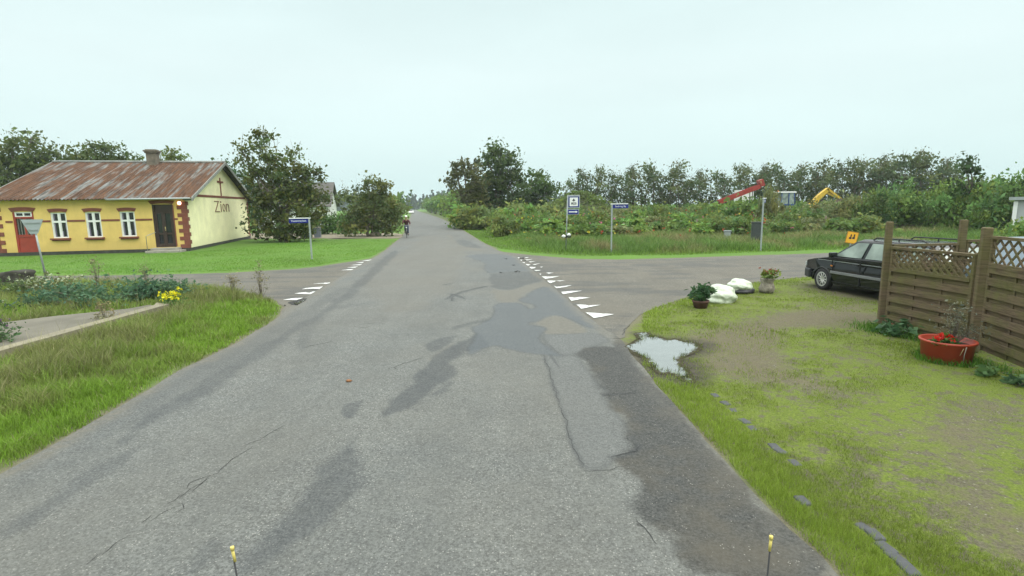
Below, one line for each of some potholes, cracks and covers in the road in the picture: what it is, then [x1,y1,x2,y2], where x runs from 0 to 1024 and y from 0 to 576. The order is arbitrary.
crack [87,426,283,564]
